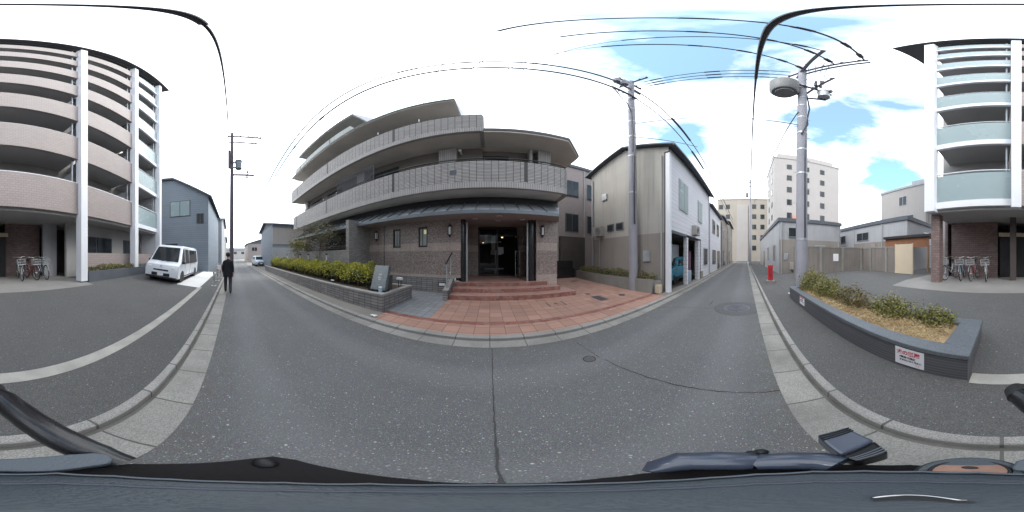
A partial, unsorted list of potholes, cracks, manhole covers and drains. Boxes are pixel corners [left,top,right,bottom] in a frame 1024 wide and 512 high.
manhole cover [724,304,750,312]
crack [577,342,780,393]
